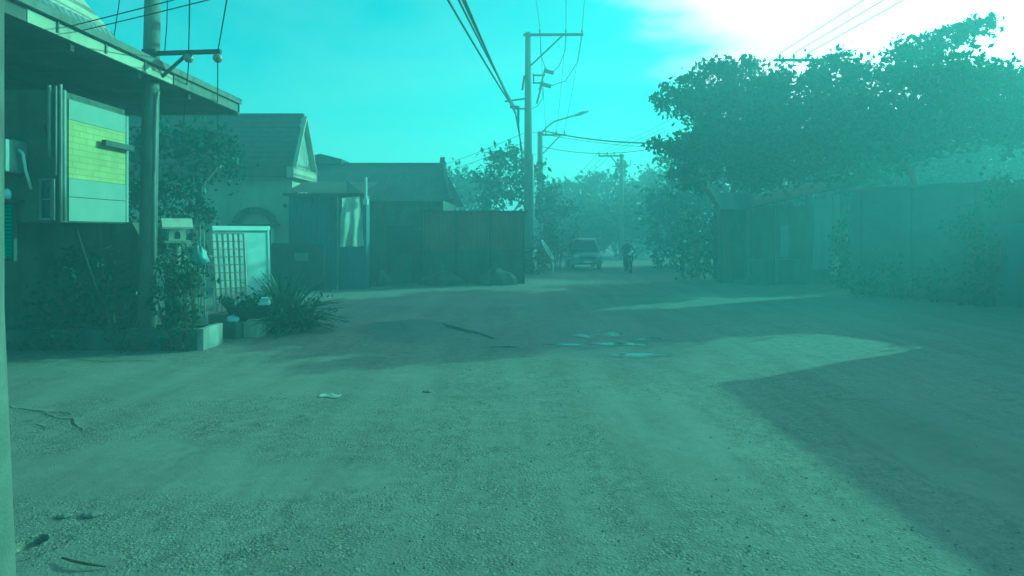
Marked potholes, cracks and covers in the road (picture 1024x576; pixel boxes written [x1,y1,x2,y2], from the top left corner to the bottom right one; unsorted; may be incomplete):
crack [9,405,85,431]
